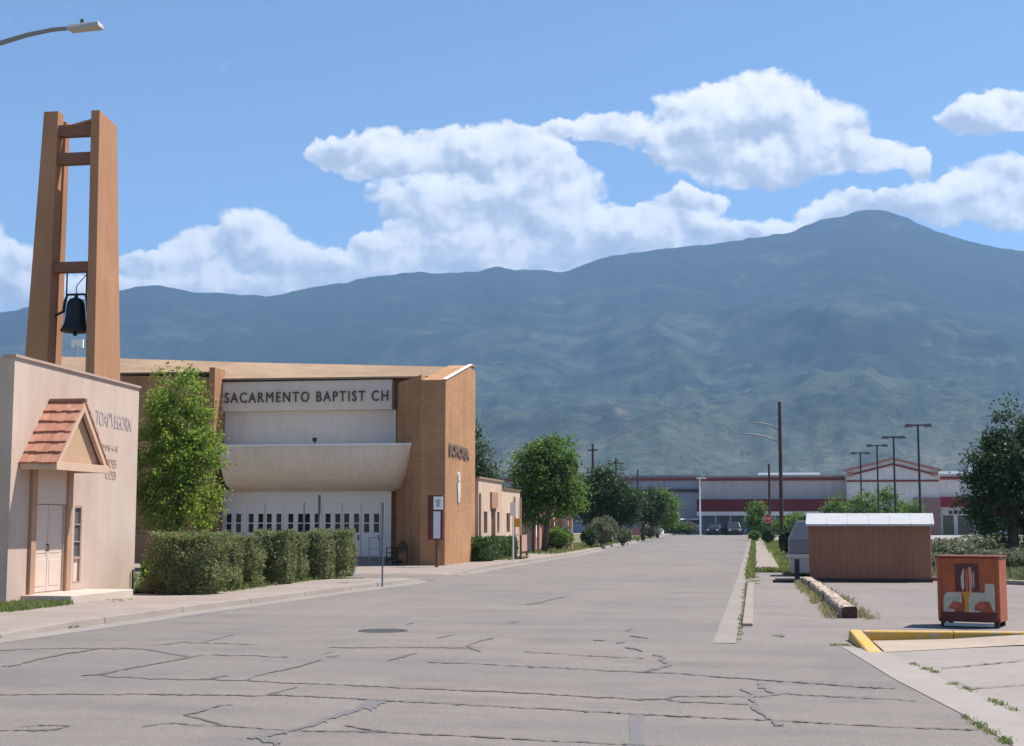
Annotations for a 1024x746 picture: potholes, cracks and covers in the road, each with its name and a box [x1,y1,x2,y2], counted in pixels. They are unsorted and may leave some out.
crack [0,635,971,746]
